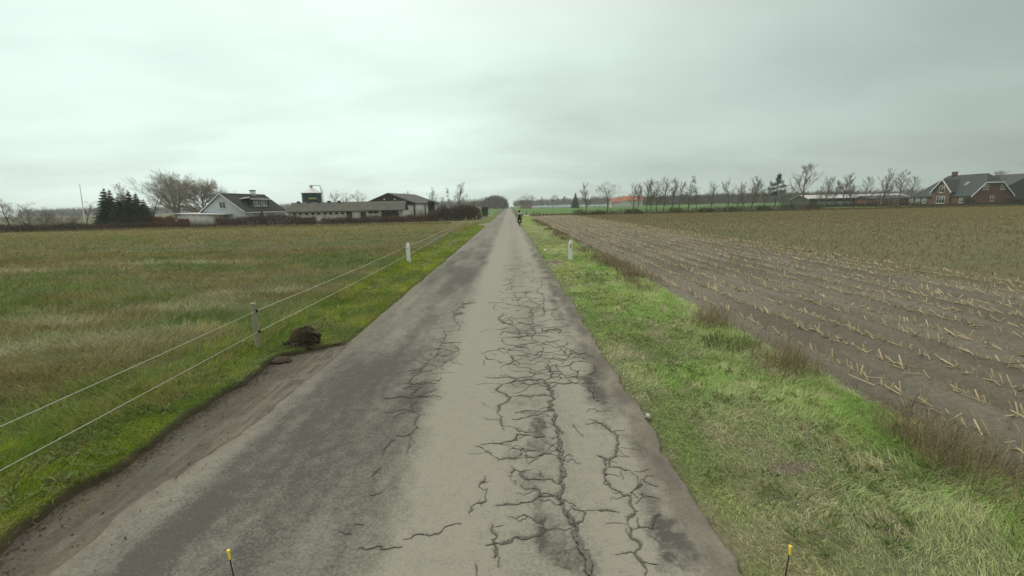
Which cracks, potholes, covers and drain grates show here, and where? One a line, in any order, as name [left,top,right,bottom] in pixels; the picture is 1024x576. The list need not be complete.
crack [339,280,660,576]
